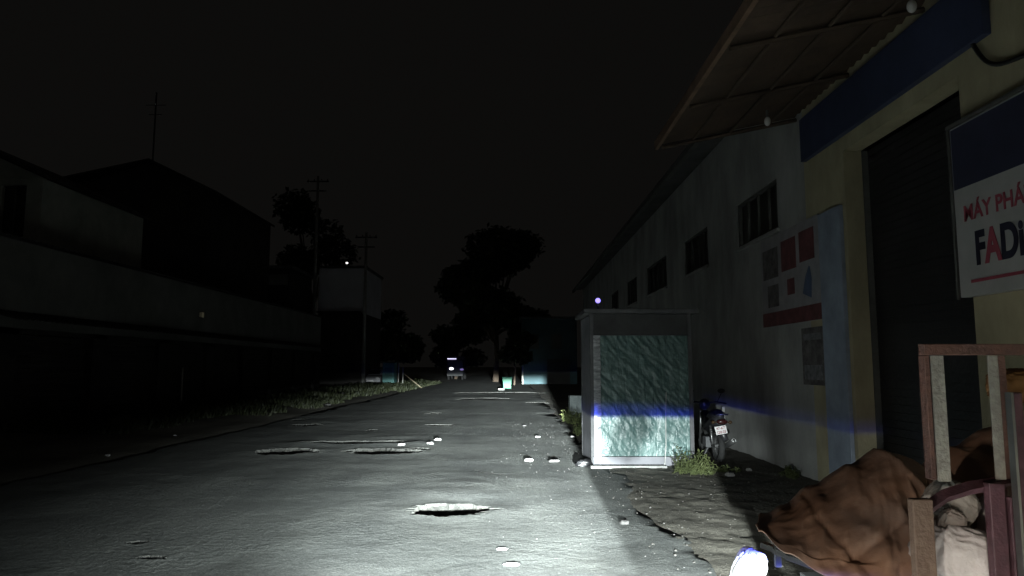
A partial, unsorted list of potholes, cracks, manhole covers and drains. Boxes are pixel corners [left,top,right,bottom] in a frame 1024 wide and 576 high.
pothole [403,503,503,517]
